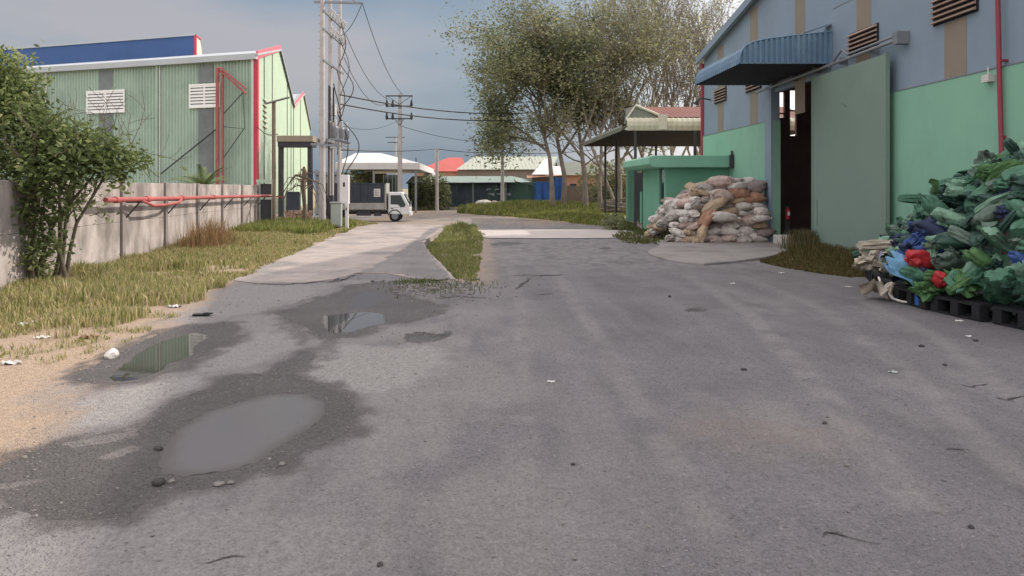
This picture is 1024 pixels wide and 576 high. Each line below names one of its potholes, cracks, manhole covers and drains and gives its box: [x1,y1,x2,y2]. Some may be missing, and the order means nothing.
pothole [70,323,237,384]
crack [511,274,562,295]
pothole [275,283,442,339]
pothole [0,353,358,521]
